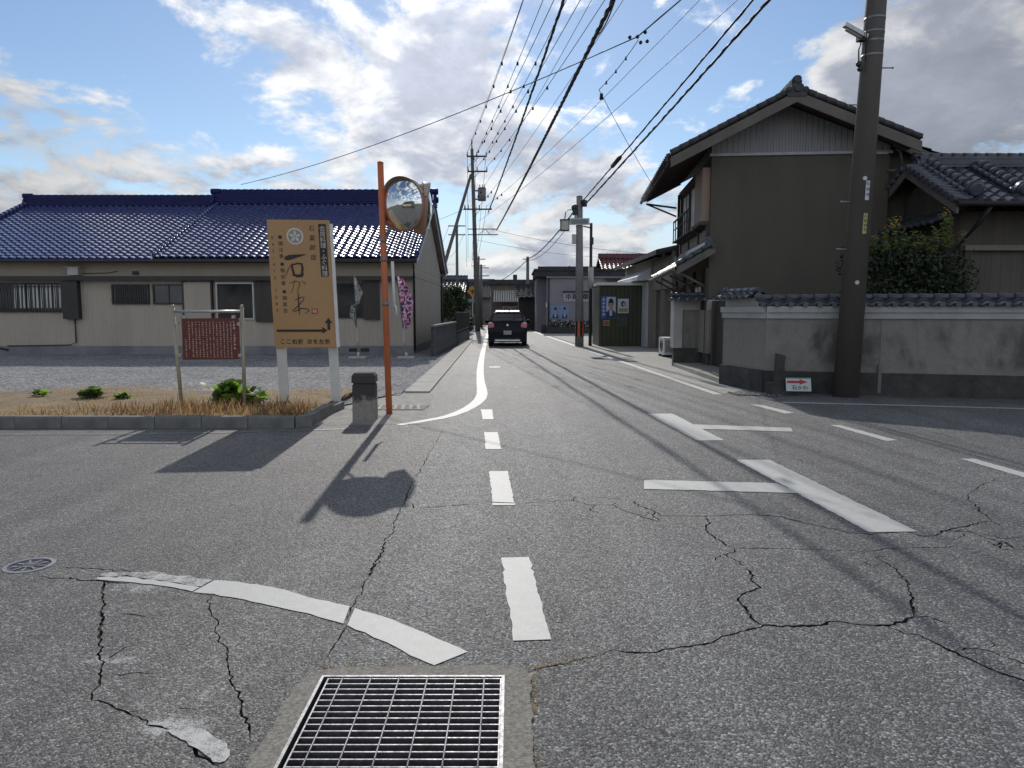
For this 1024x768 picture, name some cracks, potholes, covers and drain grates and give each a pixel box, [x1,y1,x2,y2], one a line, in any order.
crack [41,567,179,584]
manhole cover [2,557,56,574]
crack [530,479,1024,681]
crack [409,497,668,521]
